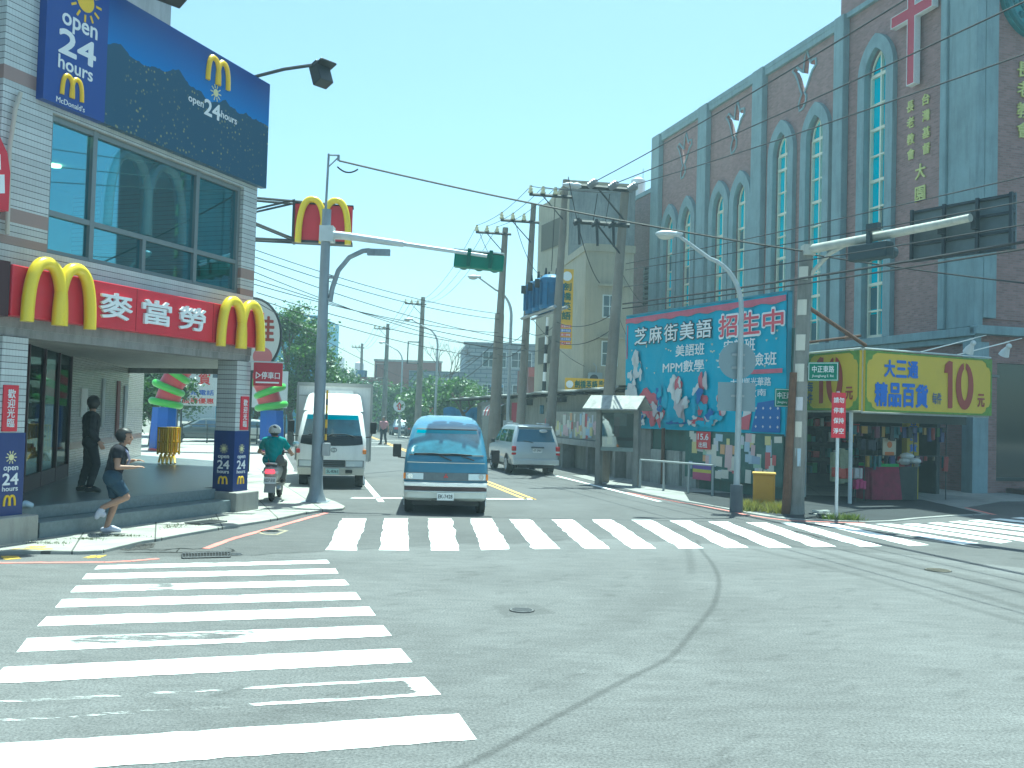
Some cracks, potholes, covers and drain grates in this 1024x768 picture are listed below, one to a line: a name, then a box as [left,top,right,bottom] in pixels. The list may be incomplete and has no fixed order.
drain grate [181,551,231,559]
